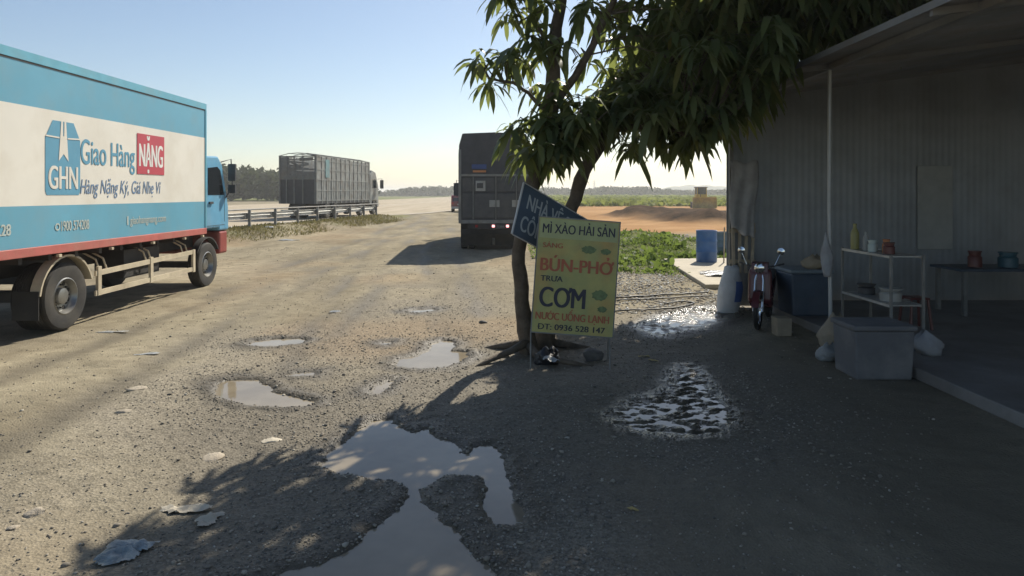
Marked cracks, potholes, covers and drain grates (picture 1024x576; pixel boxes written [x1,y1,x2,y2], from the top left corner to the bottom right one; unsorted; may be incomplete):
pothole [367,338,404,347]
pothole [242,413,547,576]
pothole [356,376,407,397]
pothole [380,337,480,371]
pothole [398,306,443,314]
pothole [232,335,317,348]
pothole [198,375,330,411]
